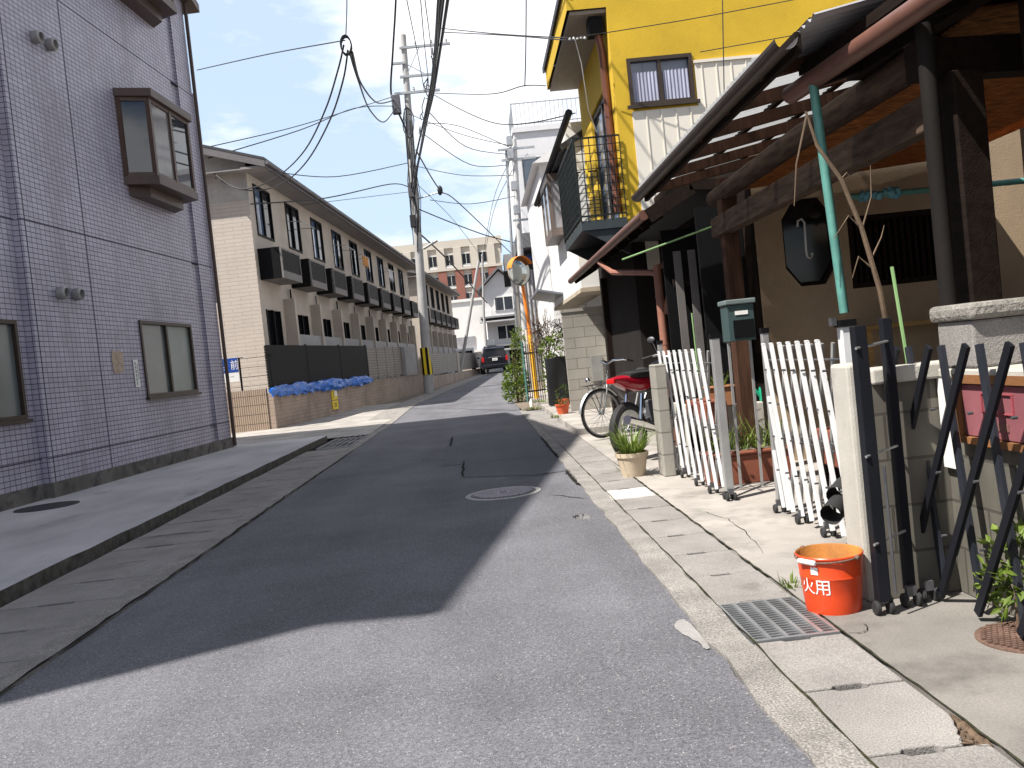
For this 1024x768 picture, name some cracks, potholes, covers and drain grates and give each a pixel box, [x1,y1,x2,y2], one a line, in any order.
pothole [950,713,994,747]
drain grate [316,423,386,451]
drain grate [718,596,841,645]
manhole cover [465,486,541,501]
manhole cover [13,501,80,513]
crack [449,437,580,498]
